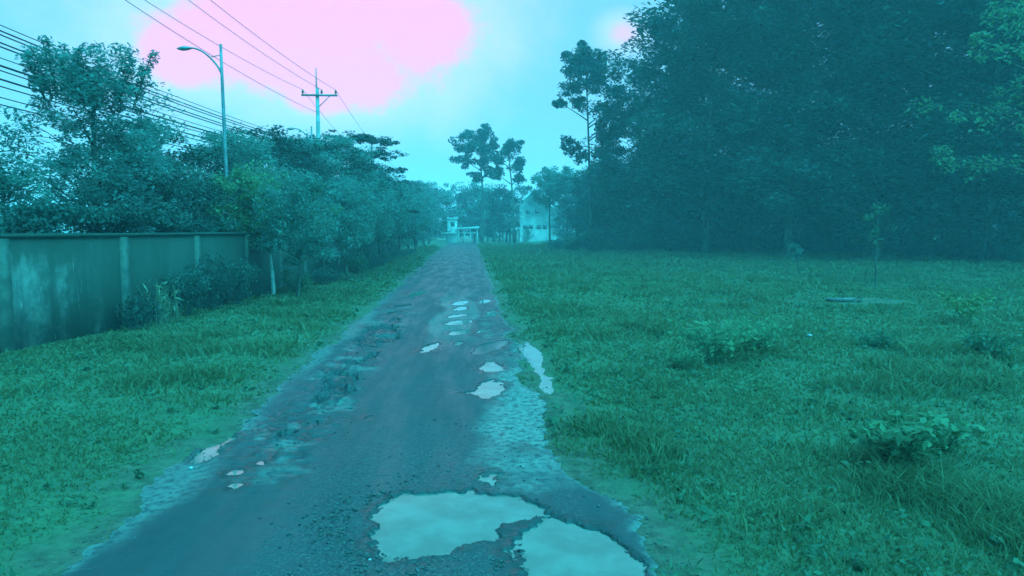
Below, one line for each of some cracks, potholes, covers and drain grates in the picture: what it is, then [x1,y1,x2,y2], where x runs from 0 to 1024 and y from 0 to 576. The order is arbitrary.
pothole [500,509,649,576]
pothole [343,350,382,367]
pothole [360,486,551,563]
pothole [187,432,242,464]
pothole [474,361,508,373]
pothole [353,324,406,347]
pothole [470,339,511,355]
pothole [457,379,510,399]
pothole [418,342,441,353]
pothole [306,369,365,409]
